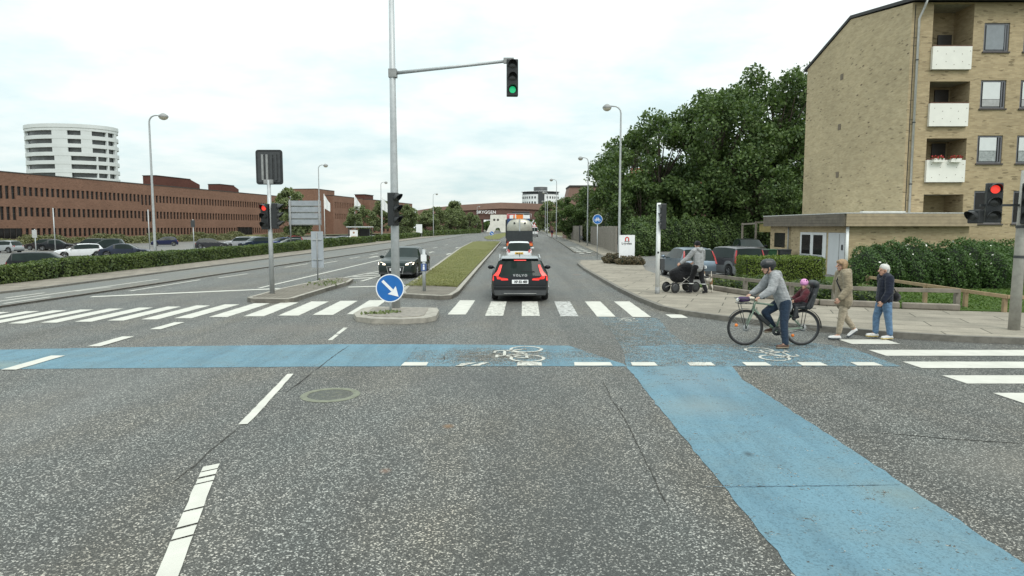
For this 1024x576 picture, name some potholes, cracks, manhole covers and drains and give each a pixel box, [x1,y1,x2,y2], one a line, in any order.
manhole cover [300,388,360,402]
crack [874,432,1012,443]
crack [603,382,669,509]
crack [171,426,241,484]
